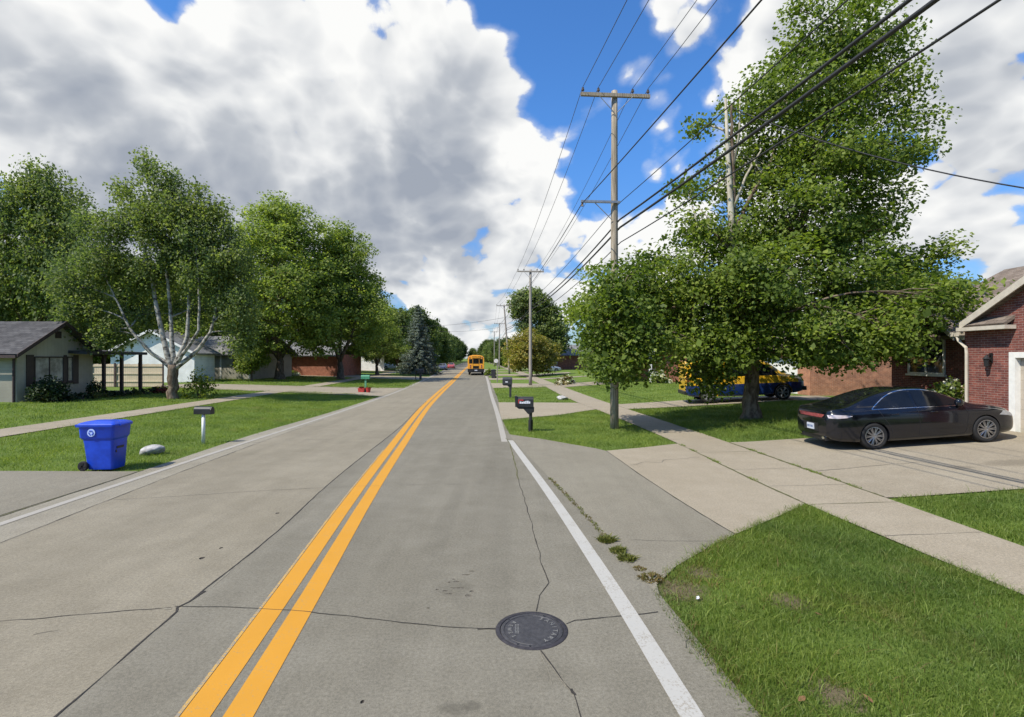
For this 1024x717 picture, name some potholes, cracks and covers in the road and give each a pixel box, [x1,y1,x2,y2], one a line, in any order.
crack [540,650,581,717]
crack [4,606,496,635]
manhole cover [496,611,568,650]
crack [507,440,549,611]
